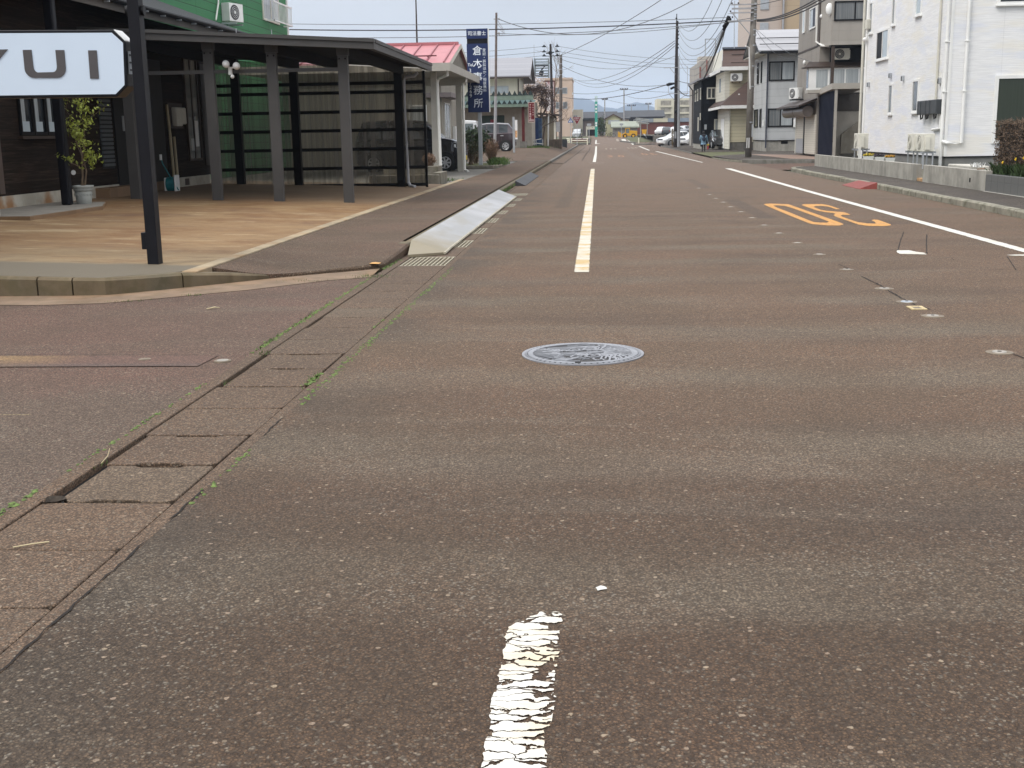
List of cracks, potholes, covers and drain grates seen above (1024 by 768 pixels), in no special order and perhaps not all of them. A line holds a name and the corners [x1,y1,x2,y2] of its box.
drain grate [400,257,455,266]
manhole cover [522,343,644,366]
